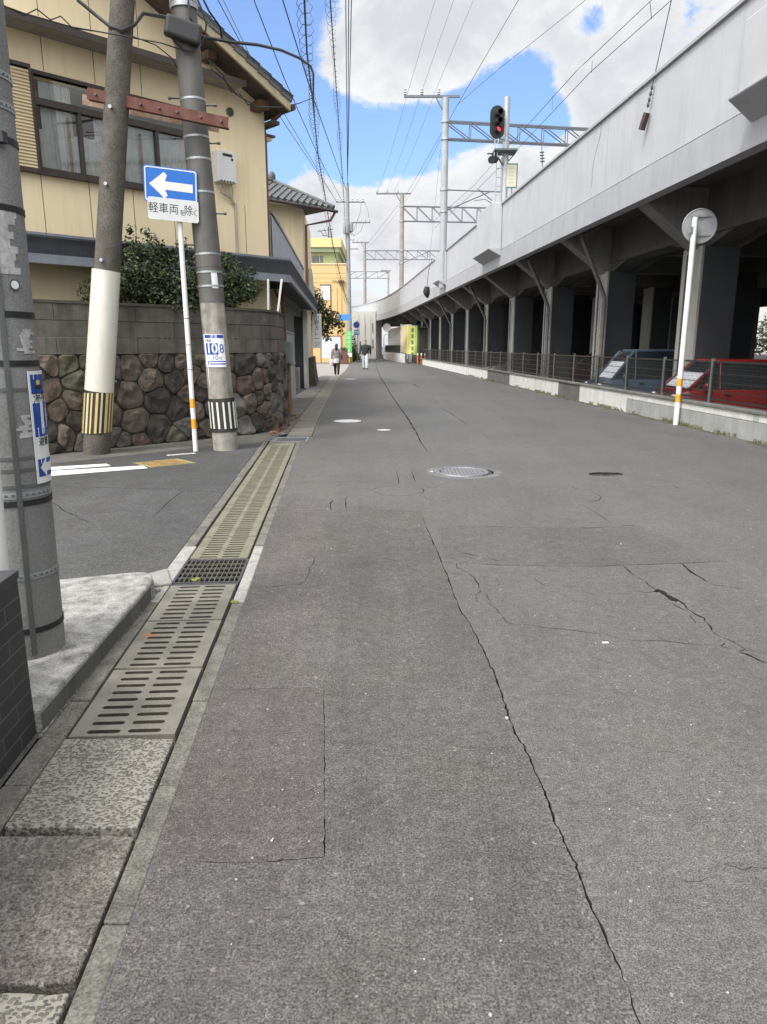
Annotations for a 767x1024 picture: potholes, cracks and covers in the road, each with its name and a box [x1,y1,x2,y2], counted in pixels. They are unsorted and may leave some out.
crack [426,548,767,664]
crack [52,486,224,522]
manhole cover [426,465,503,479]
drain grate [171,559,249,591]
